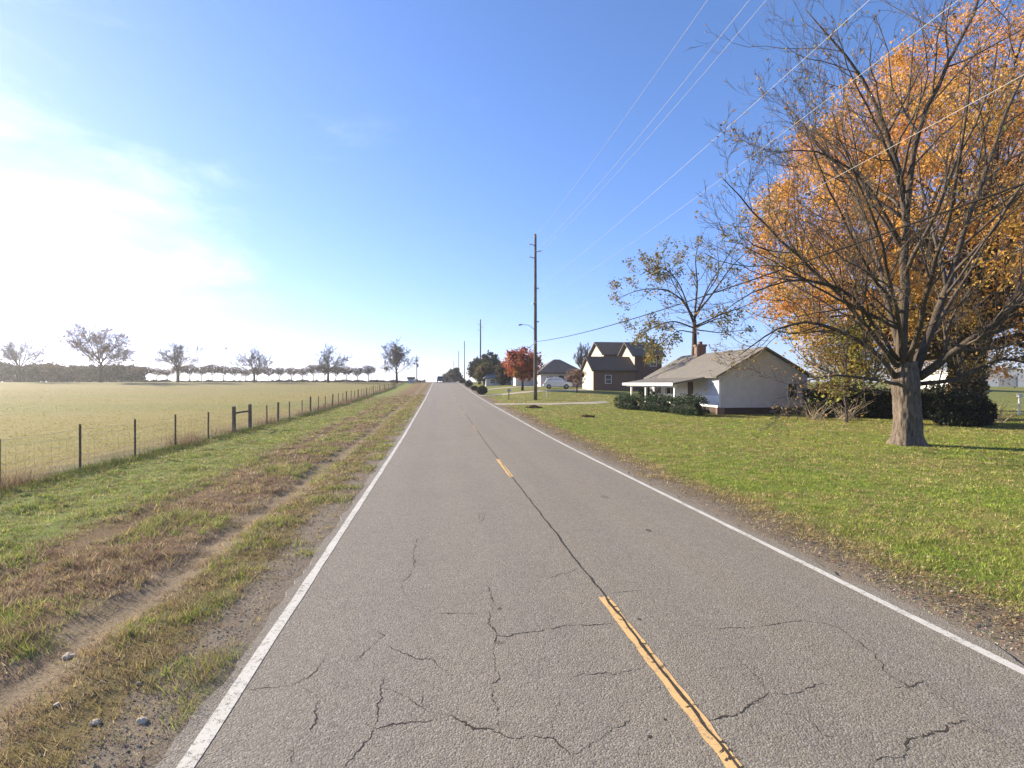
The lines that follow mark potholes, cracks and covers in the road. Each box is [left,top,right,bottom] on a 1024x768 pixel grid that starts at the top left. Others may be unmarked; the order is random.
crack [343,410,992,768]
